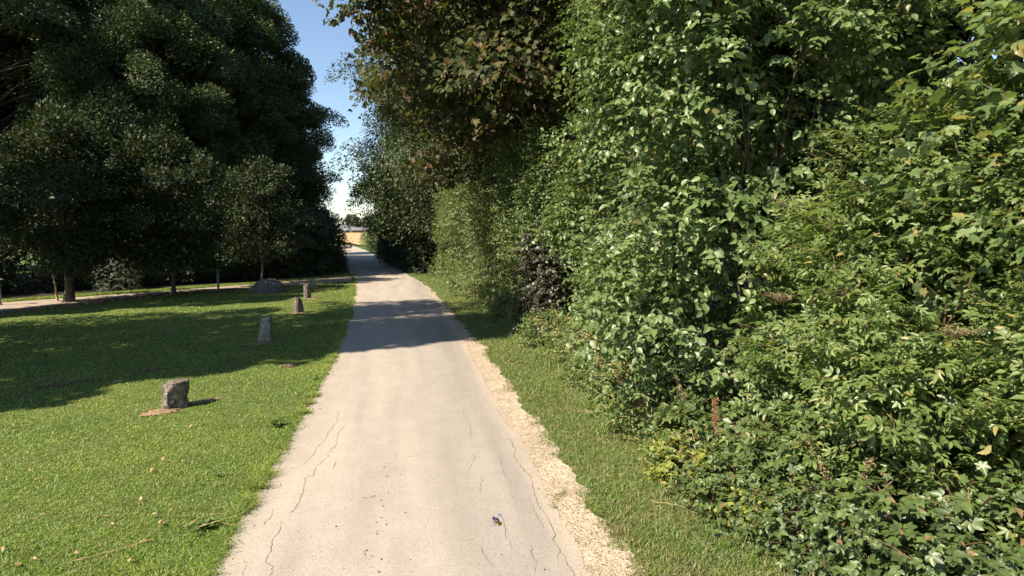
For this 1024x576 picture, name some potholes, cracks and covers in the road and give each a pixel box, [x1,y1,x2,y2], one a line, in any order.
crack [499,412,575,576]
